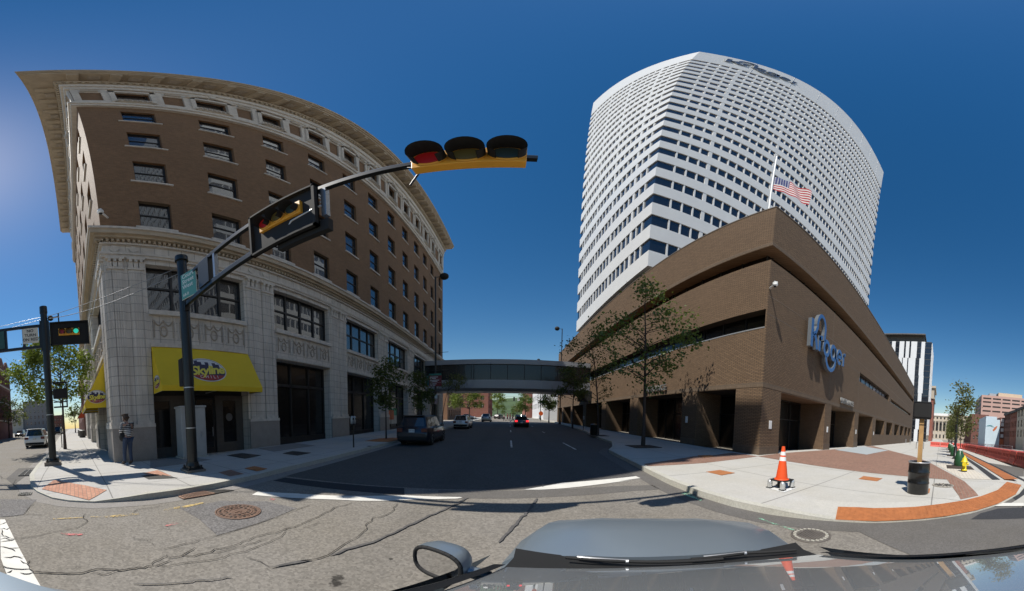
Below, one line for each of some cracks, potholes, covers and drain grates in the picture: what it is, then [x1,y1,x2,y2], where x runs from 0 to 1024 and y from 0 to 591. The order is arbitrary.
drain grate [178,490,215,499]
crack [1,477,350,575]
manhole cover [791,528,831,543]
manhole cover [215,504,261,520]
